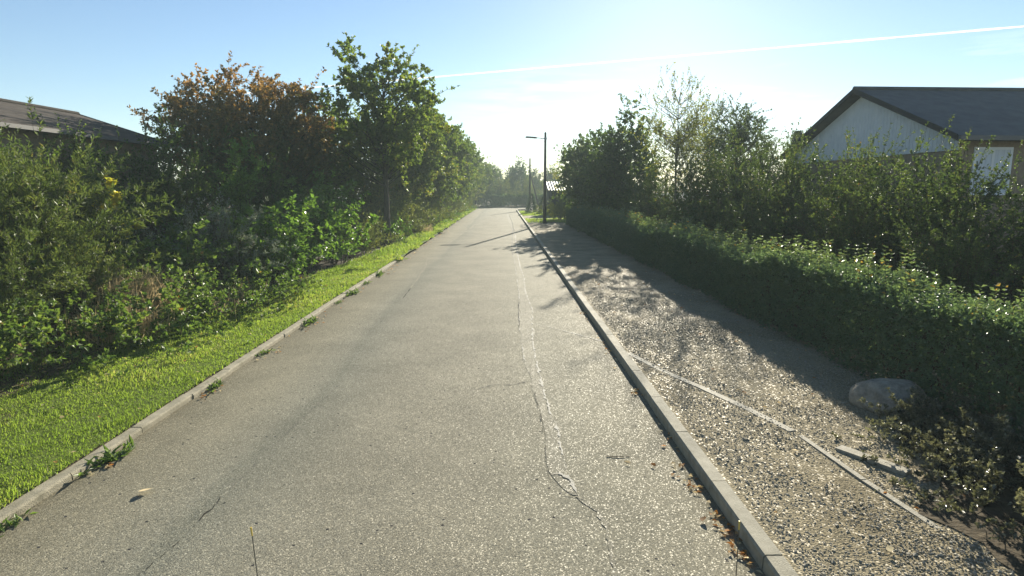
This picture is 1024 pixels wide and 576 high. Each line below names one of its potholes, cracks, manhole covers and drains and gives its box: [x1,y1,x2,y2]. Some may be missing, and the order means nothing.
crack [139,462,256,576]
crack [404,214,621,576]
